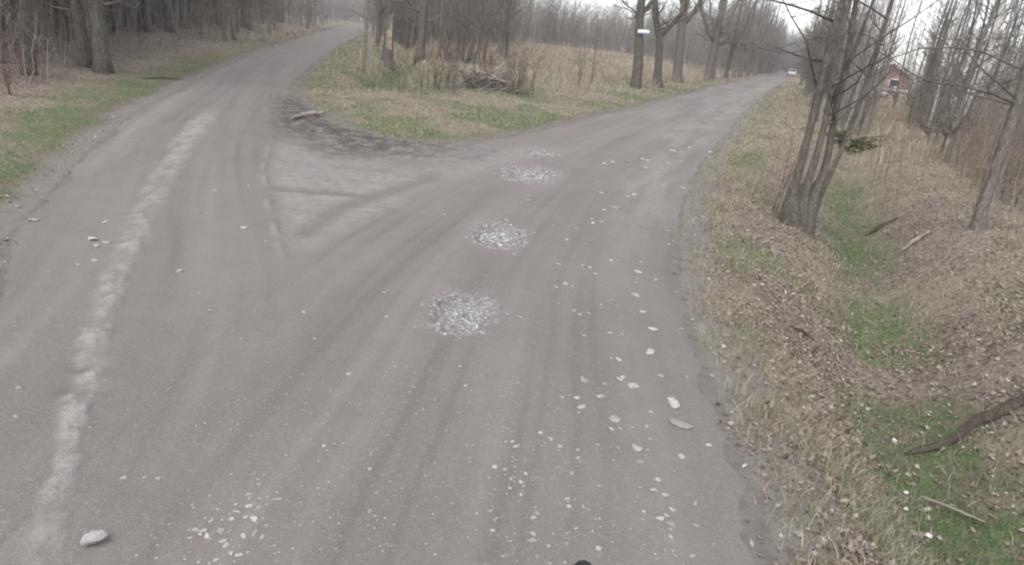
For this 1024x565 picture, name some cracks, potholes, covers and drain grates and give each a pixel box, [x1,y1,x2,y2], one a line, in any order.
pothole [466,218,534,255]
pothole [491,162,570,184]
pothole [421,290,510,339]
